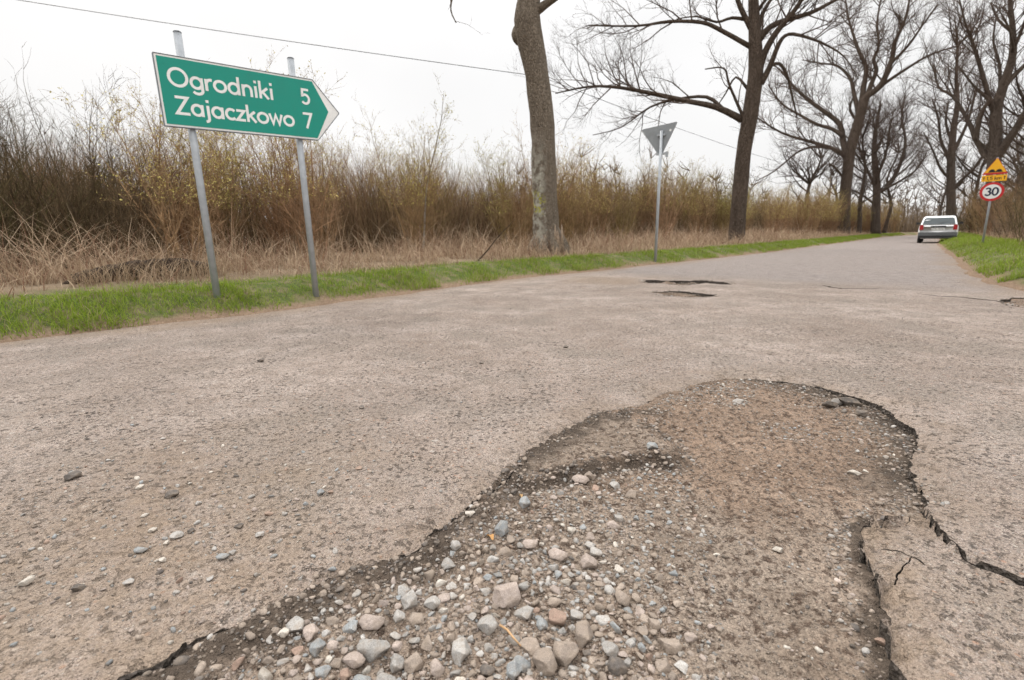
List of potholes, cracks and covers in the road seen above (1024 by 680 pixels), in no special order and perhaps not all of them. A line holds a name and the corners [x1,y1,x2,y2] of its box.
crack [881,509,1024,586]
pothole [117,378,929,680]
